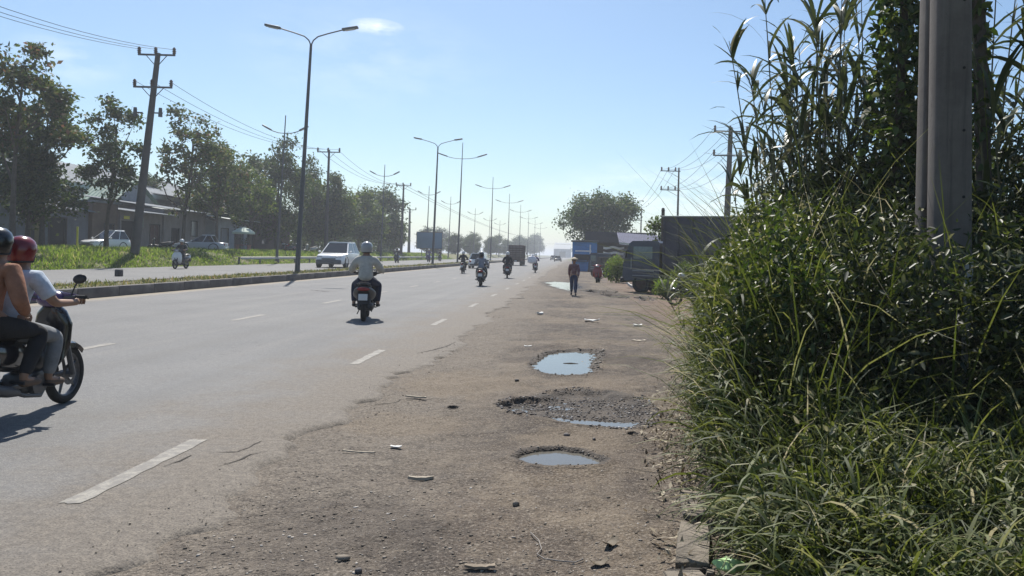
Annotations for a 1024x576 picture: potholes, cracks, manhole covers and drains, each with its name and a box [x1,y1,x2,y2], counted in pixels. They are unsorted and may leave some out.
pothole [492,386,663,430]
pothole [522,348,608,377]
pothole [502,444,616,469]
pothole [537,281,593,293]
